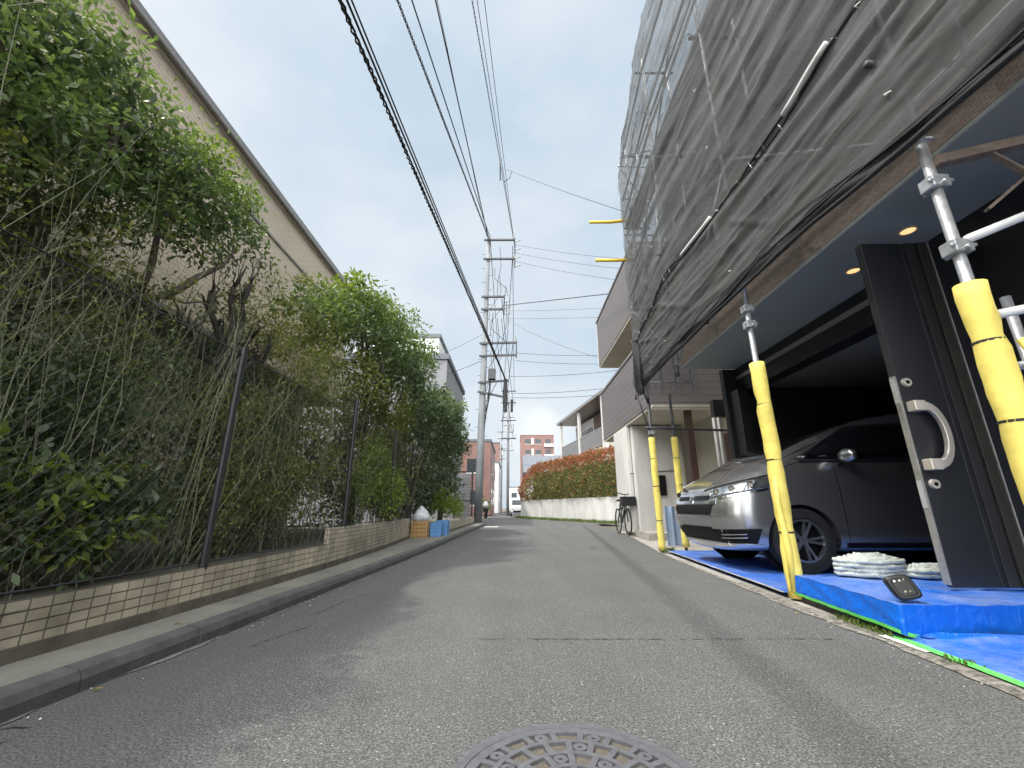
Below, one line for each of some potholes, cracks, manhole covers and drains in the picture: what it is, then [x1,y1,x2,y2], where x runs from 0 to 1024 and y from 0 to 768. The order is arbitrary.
manhole cover [453,723,694,768]
